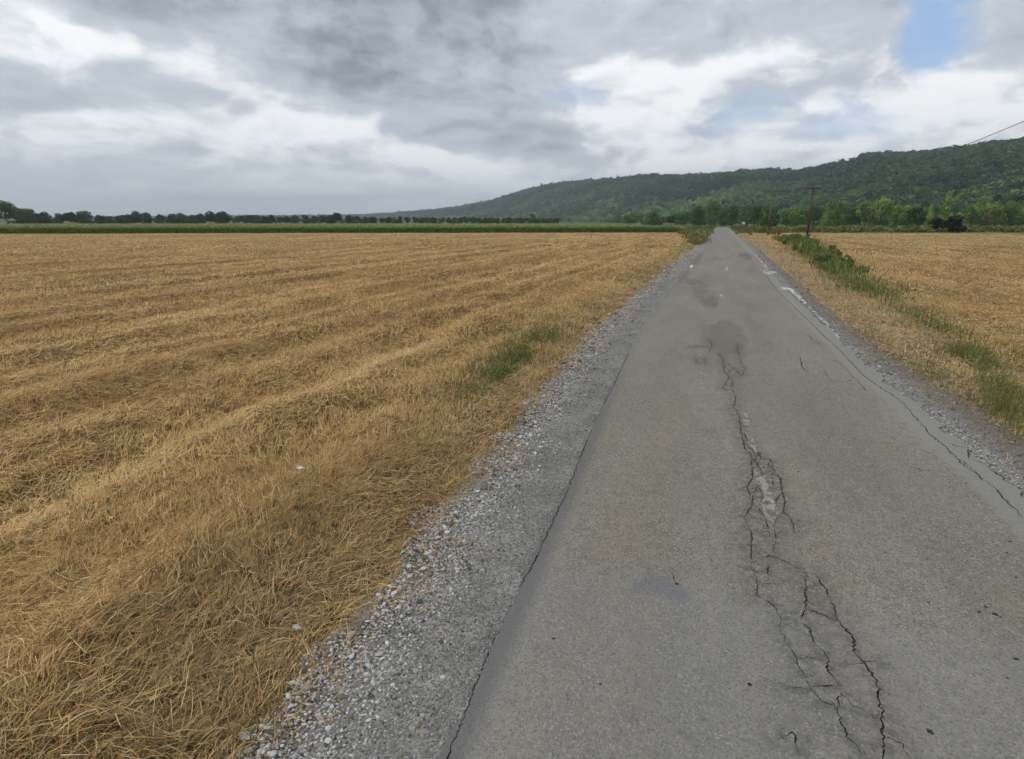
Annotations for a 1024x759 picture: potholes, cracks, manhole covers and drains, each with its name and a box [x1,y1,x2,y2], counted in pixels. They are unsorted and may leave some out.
crack [754,256,1019,513]
crack [695,339,745,412]
crack [737,415,904,759]
